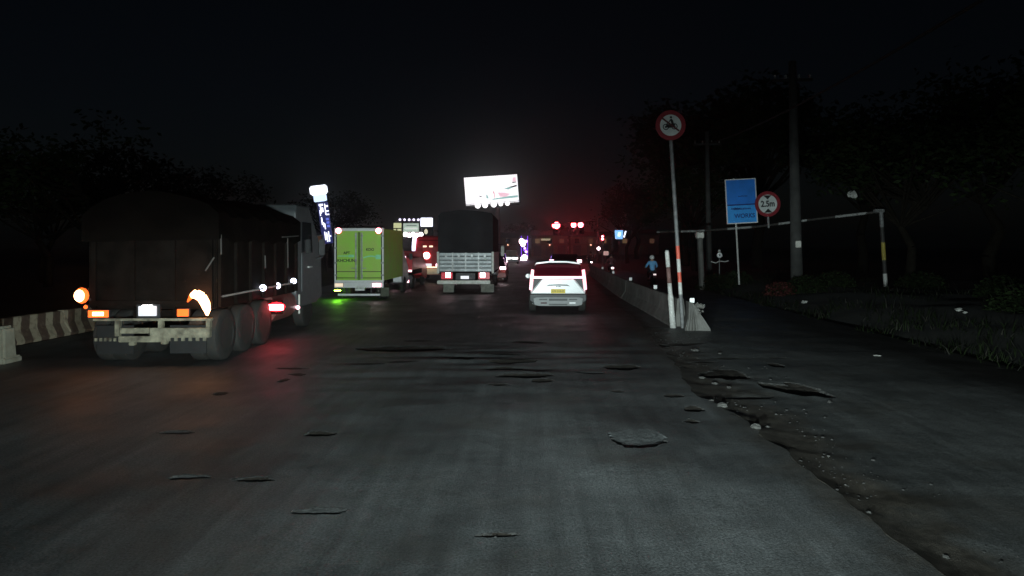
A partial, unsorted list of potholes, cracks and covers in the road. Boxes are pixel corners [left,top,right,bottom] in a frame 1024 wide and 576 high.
pothole [698,369,752,380]
pothole [756,381,836,398]
pothole [290,507,348,515]
pothole [607,428,668,448]
